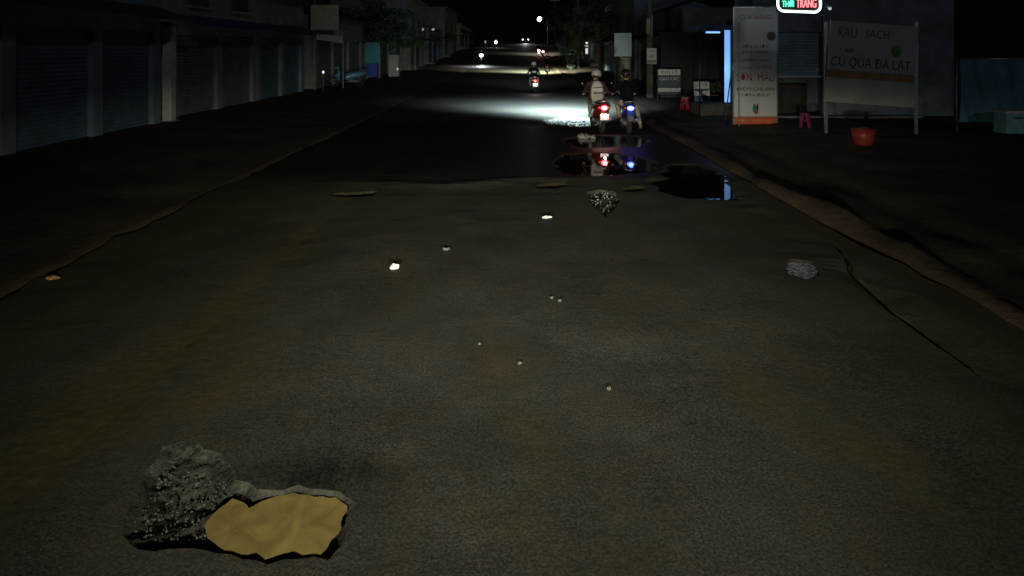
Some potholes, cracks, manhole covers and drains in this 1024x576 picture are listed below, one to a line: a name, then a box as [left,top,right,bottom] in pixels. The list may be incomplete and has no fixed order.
crack [831,241,981,377]
pothole [550,152,659,176]
pothole [645,163,739,201]
pothole [586,189,621,217]
pothole [121,438,356,564]
pothole [784,259,821,279]
pothole [561,134,652,148]
